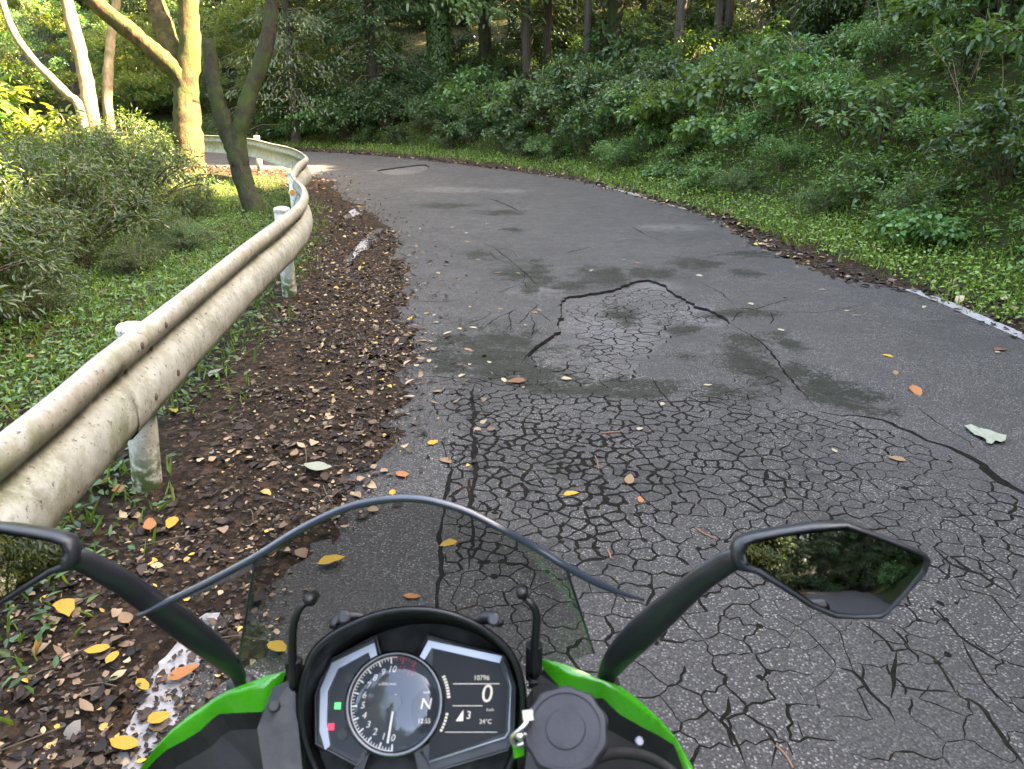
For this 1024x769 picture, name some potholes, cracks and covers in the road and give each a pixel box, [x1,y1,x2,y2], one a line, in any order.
crack [426,244,1024,768]
